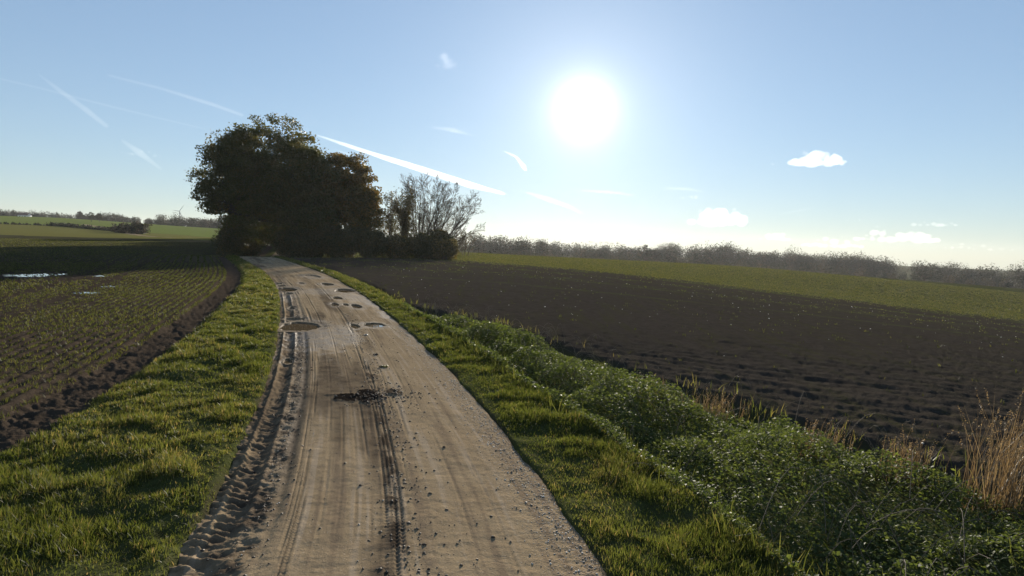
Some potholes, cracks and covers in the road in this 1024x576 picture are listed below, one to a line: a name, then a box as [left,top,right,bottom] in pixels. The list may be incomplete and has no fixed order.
pothole [277,321,324,332]
